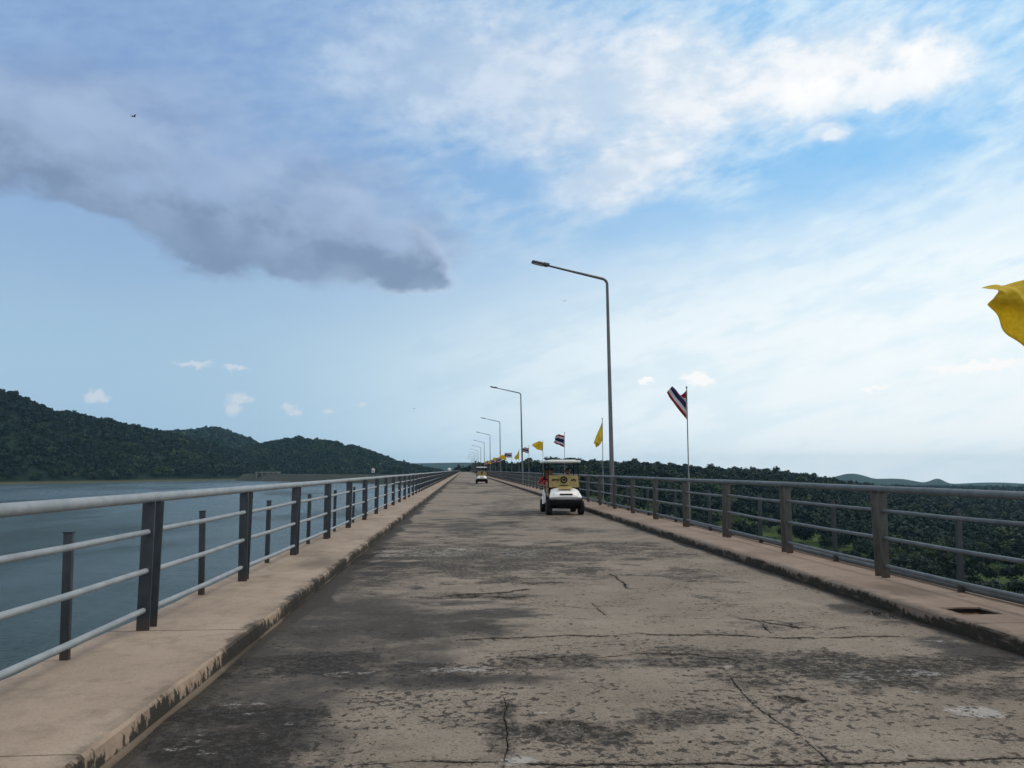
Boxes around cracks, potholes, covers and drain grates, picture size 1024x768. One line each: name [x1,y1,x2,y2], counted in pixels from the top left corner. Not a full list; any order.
crack [350,615,1024,768]
crack [554,573,638,615]
crack [441,582,583,599]
